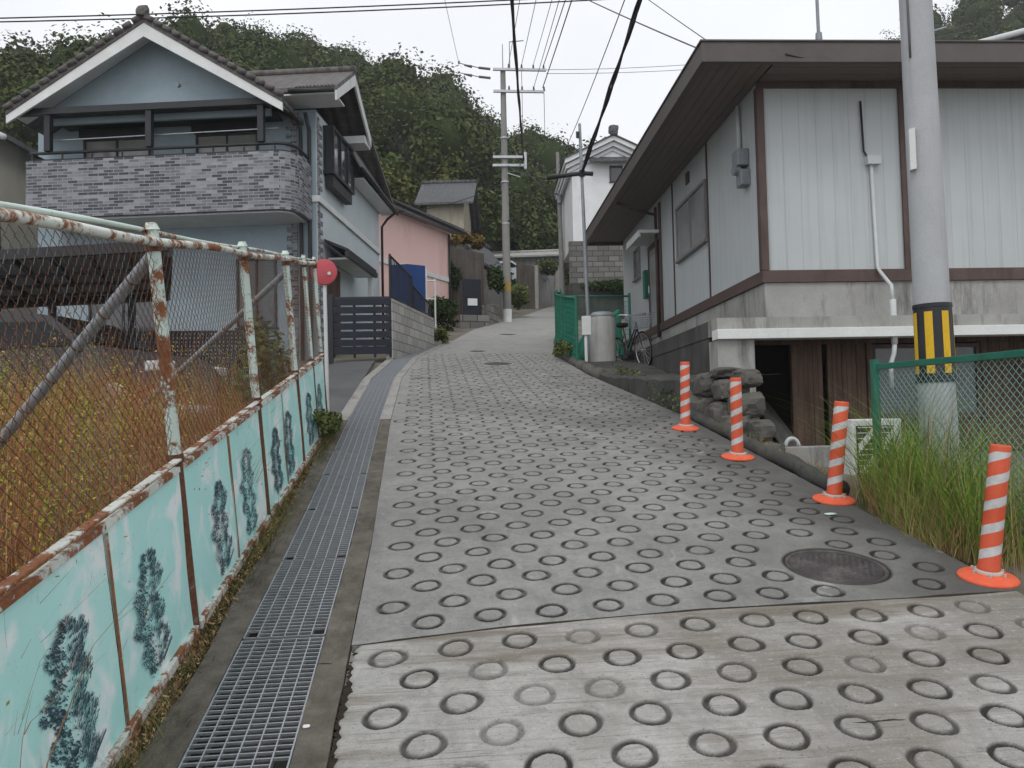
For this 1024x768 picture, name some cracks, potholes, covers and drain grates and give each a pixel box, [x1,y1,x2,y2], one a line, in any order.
drain grate [359,391,390,402]
drain grate [370,374,397,382]
drain grate [178,637,325,768]
manhole cover [784,550,889,585]
drain grate [282,509,359,564]
drain grate [344,414,382,430]
drain grate [243,559,346,644]
drain grate [365,382,393,391]
drain grate [322,449,373,476]
drain grate [352,401,386,414]
drain grate [335,429,378,450]
